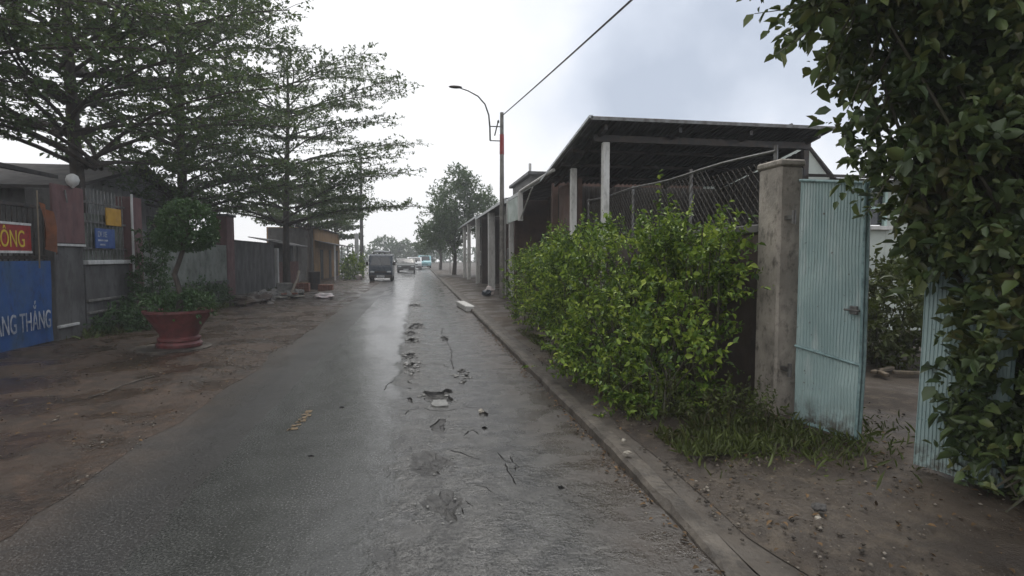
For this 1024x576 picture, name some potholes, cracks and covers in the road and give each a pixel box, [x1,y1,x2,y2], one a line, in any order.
pothole [417,388,456,407]
pothole [430,419,446,433]
pothole [411,489,465,524]
crack [462,452,522,515]
